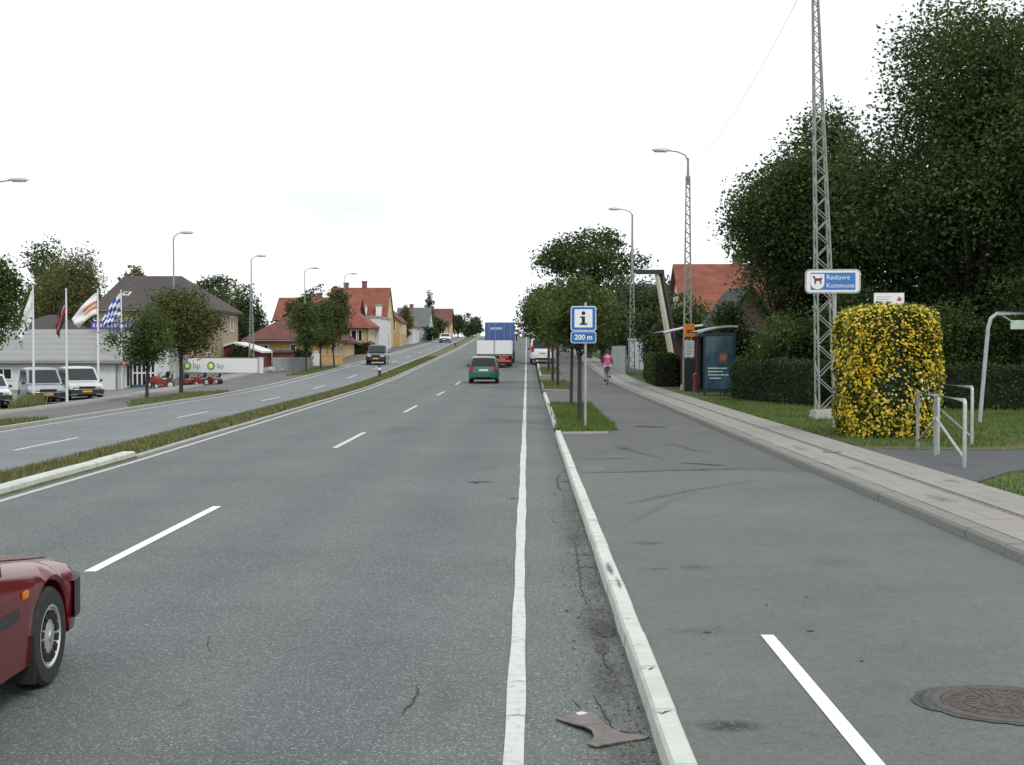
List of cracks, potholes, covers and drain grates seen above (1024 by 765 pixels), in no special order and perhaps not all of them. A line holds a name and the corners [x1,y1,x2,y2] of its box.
crack [401,683,421,715]
manhole cover [930,686,1024,722]
crack [571,538,595,616]
